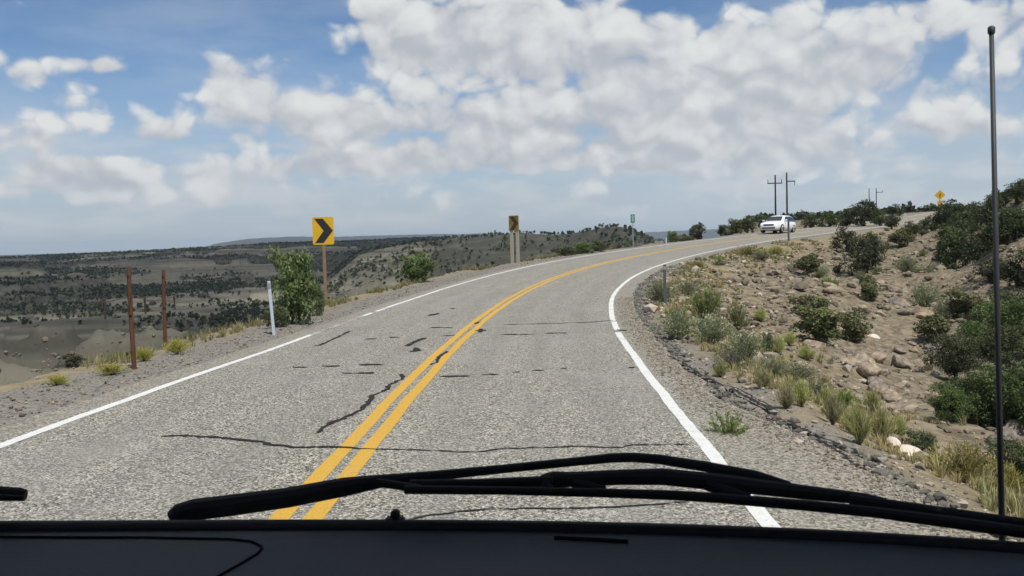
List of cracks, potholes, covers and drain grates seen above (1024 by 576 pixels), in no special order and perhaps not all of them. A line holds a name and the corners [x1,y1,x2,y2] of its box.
crack [369,308,635,377]
crack [163,364,682,452]
crack [409,501,686,519]
